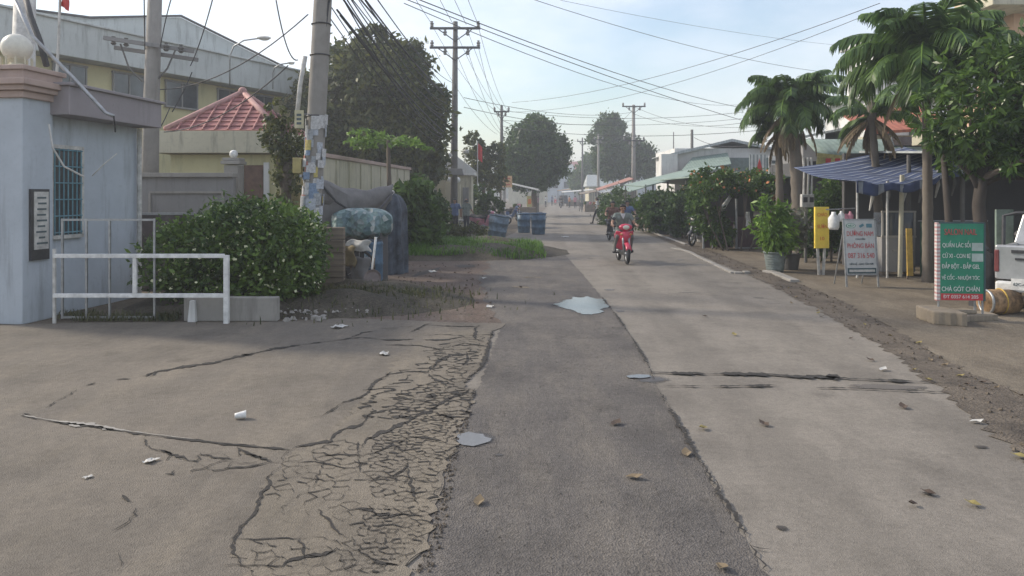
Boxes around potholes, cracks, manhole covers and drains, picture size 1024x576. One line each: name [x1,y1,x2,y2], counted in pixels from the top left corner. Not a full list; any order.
crack [45,324,495,576]
crack [712,480,768,571]
pothole [554,296,609,314]
pothole [457,431,494,446]
